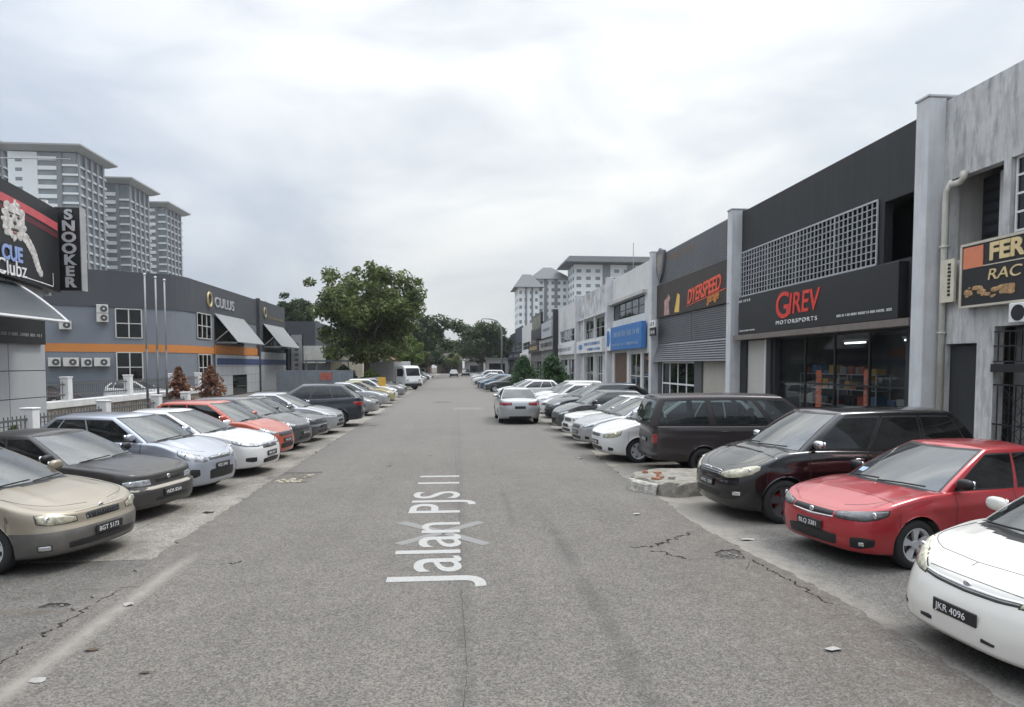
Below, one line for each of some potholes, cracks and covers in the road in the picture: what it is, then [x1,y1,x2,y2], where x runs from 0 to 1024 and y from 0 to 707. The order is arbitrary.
crack [746,559,836,605]
crack [0,586,139,664]
pothole [714,549,745,560]
crack [629,532,712,560]
